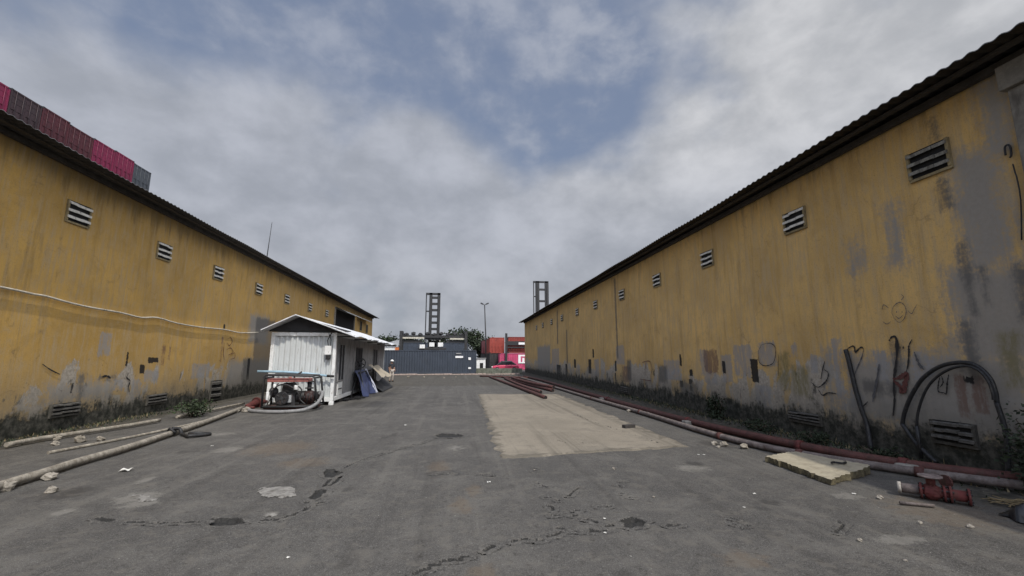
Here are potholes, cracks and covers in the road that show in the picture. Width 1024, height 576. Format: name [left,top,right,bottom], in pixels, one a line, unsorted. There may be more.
crack [117,439,433,526]
pothole [610,515,655,532]
pothole [316,467,347,479]
pothole [201,514,257,529]
crack [405,466,688,576]
pothole [302,487,334,502]
